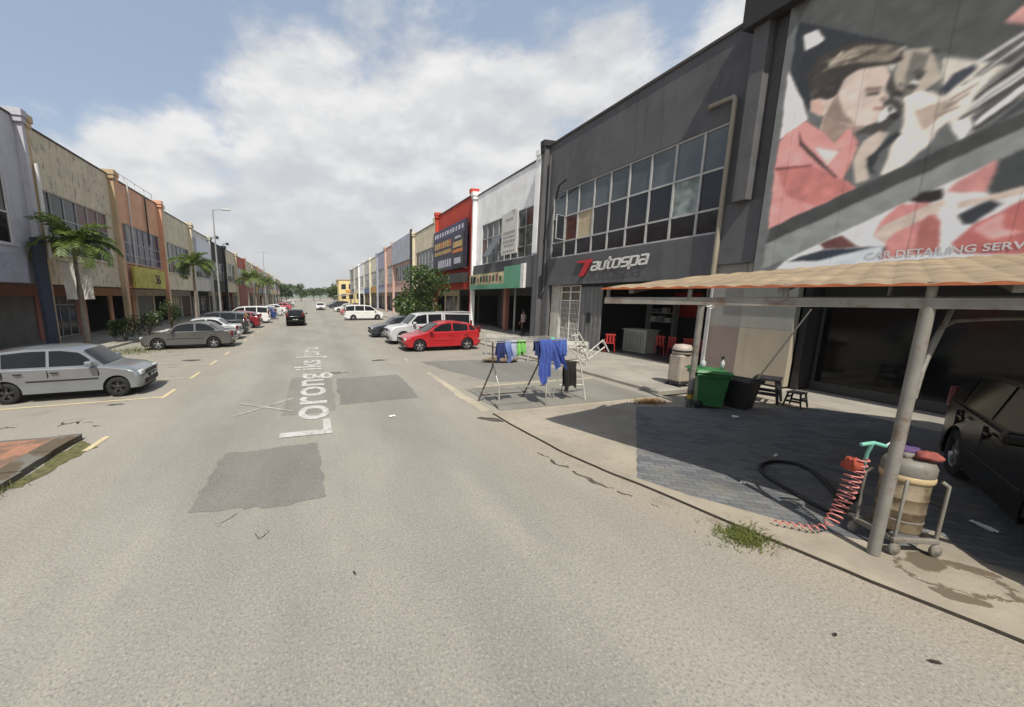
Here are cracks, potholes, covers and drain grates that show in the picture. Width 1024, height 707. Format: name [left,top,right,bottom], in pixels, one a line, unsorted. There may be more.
crack [538,453,659,508]
